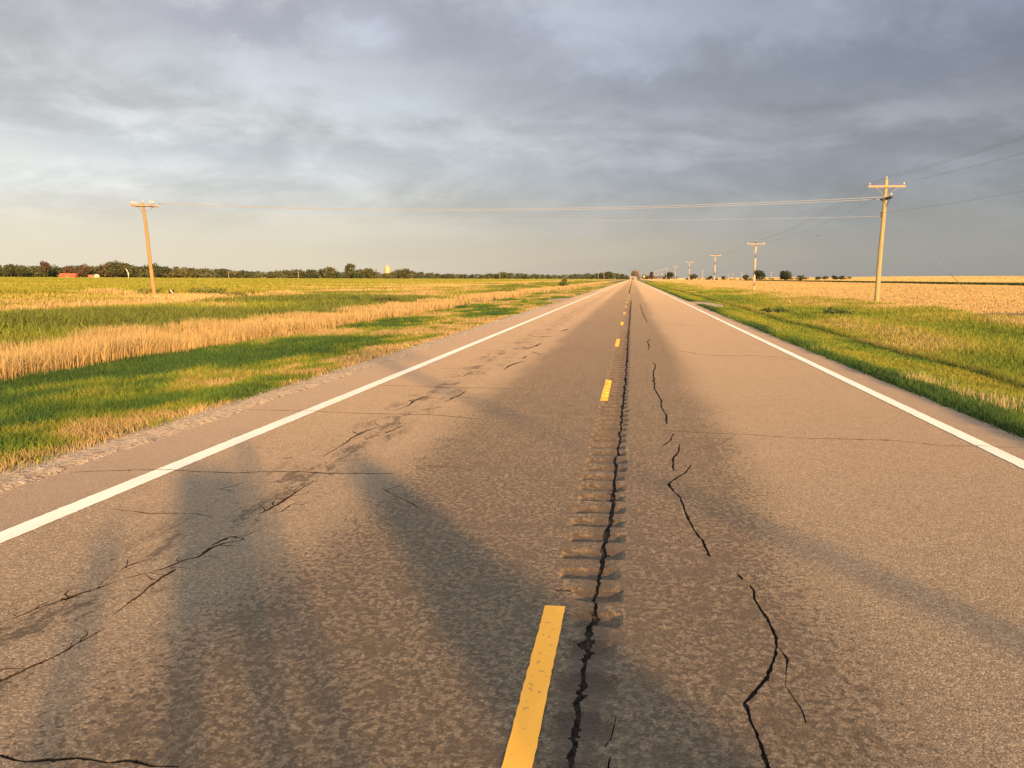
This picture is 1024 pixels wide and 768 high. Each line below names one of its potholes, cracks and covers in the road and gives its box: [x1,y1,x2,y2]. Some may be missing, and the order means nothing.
crack [737,573,806,768]
crack [565,300,647,768]
crack [485,329,568,370]
crack [0,529,266,682]
crack [114,509,213,518]
crack [0,754,179,767]
crack [83,371,511,515]
crack [647,323,1017,557]
